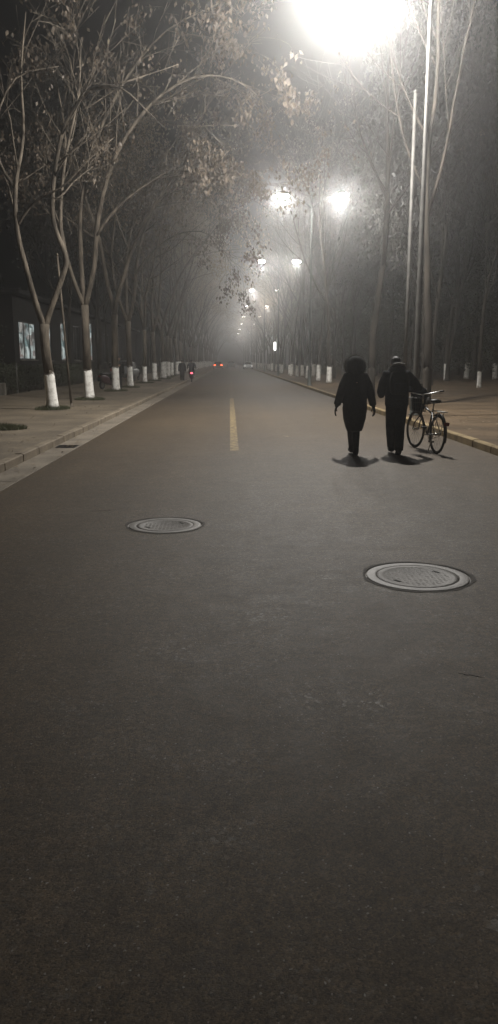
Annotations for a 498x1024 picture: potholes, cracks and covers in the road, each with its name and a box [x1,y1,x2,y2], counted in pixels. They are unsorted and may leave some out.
manhole cover [125,517,205,534]
manhole cover [363,561,477,592]
